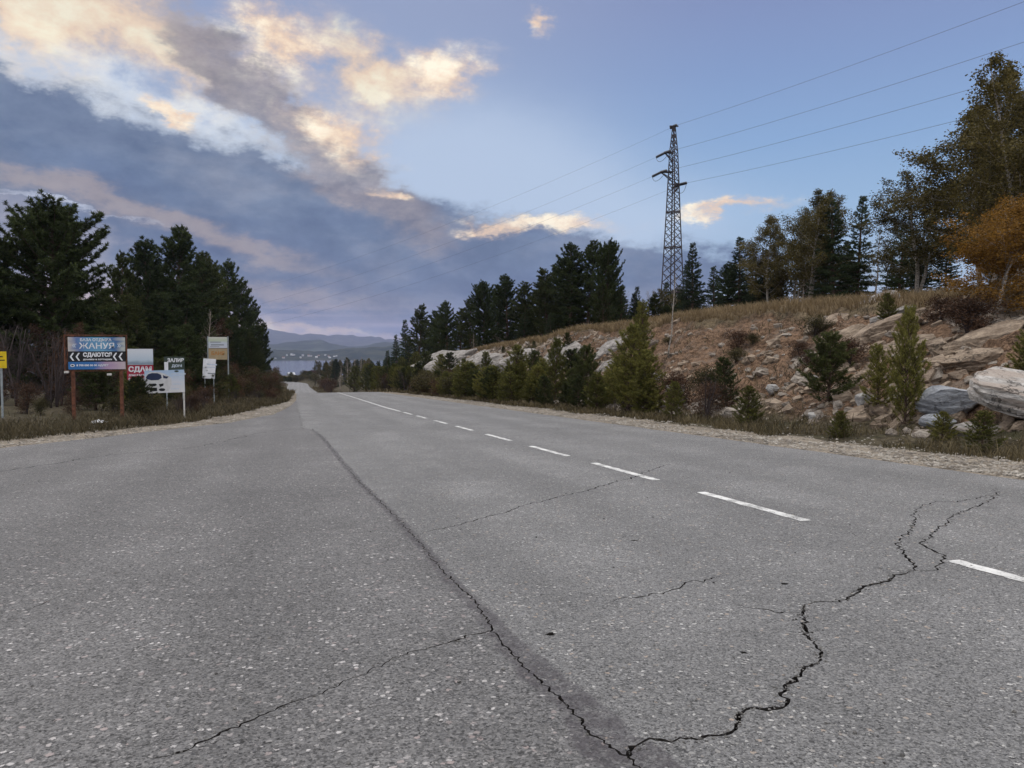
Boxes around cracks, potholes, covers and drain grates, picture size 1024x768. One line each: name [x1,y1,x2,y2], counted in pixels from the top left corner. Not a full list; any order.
crack [423,465,664,533]
crack [626,488,999,759]
